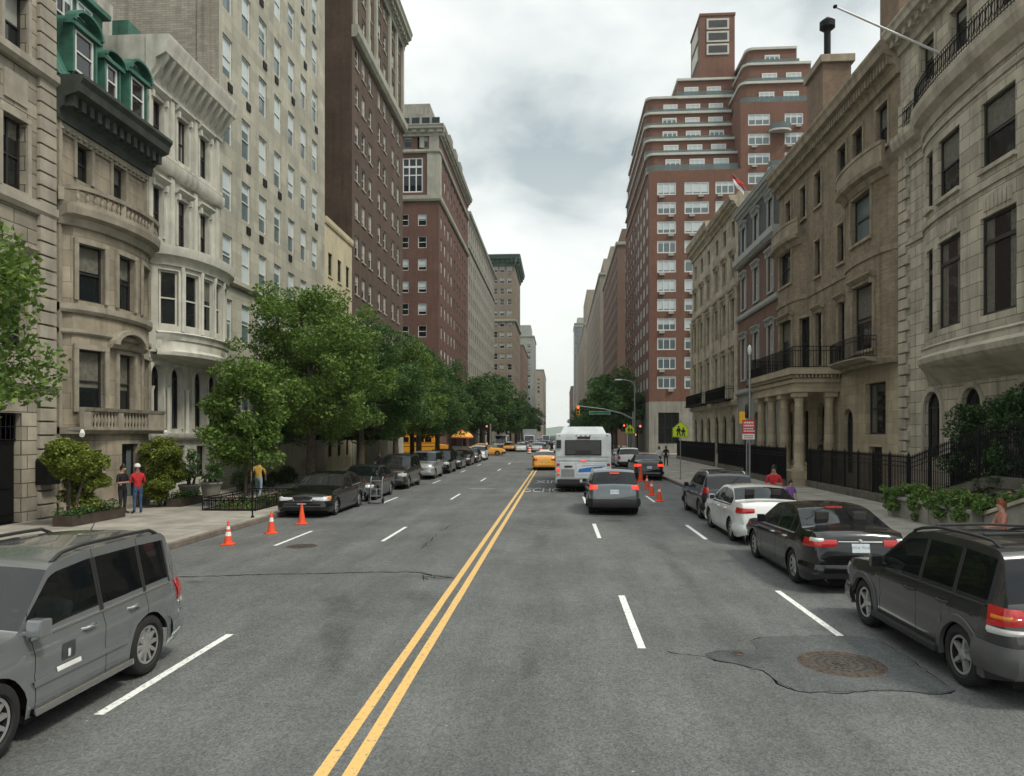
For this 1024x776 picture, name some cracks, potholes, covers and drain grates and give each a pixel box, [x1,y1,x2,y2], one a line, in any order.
crack [180,572,452,581]
crack [667,635,955,695]
manhole cover [797,651,888,678]
